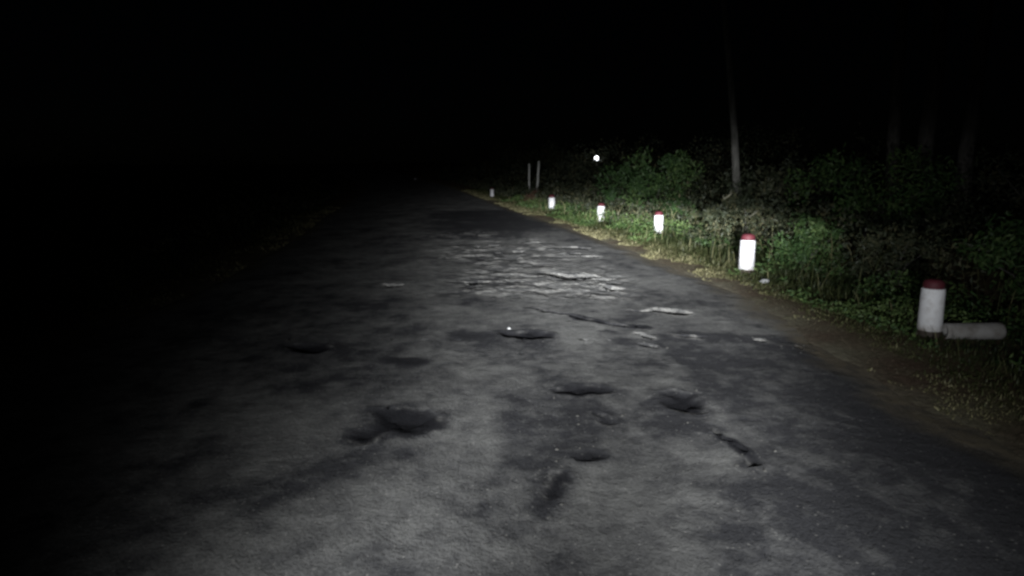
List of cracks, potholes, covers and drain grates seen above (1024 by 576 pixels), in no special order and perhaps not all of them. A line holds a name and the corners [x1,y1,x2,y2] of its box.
pothole [536,468,576,512]
pothole [545,382,618,399]
pothole [497,330,557,340]
pothole [282,342,334,354]
pothole [571,448,610,462]
crack [528,307,648,328]
pothole [344,406,445,447]
pothole [655,388,710,415]
pothole [625,307,693,315]
